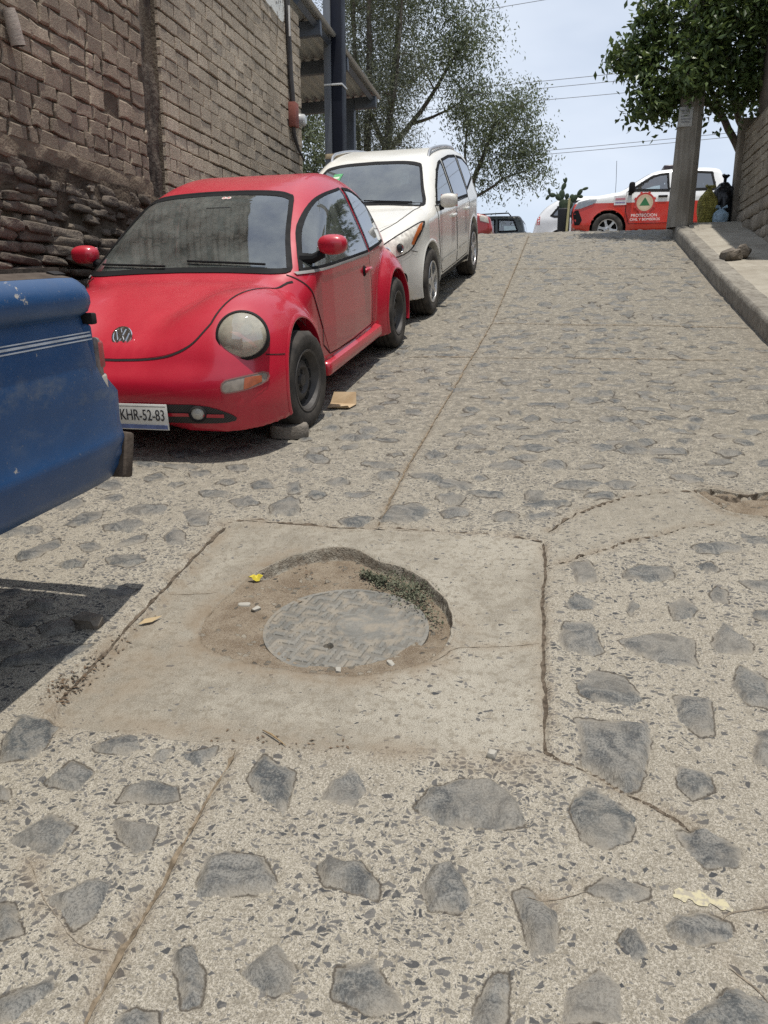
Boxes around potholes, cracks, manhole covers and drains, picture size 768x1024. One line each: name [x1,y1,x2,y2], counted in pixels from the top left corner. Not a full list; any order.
manhole cover [263,589,429,667]
crack [528,891,586,902]
pothole [694,488,768,518]
crack [722,908,766,920]
crack [58,490,714,833]
